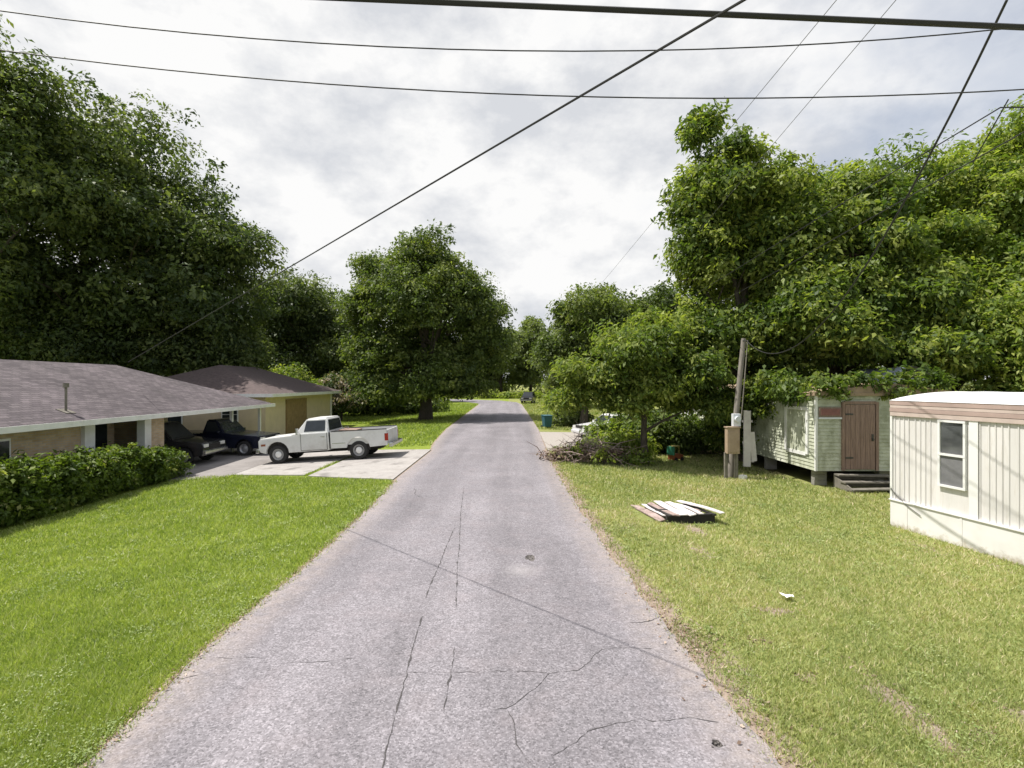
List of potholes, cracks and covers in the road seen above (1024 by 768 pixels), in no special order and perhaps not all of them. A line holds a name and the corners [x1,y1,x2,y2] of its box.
crack [498,648,652,753]
crack [554,717,716,755]
crack [382,488,492,768]
